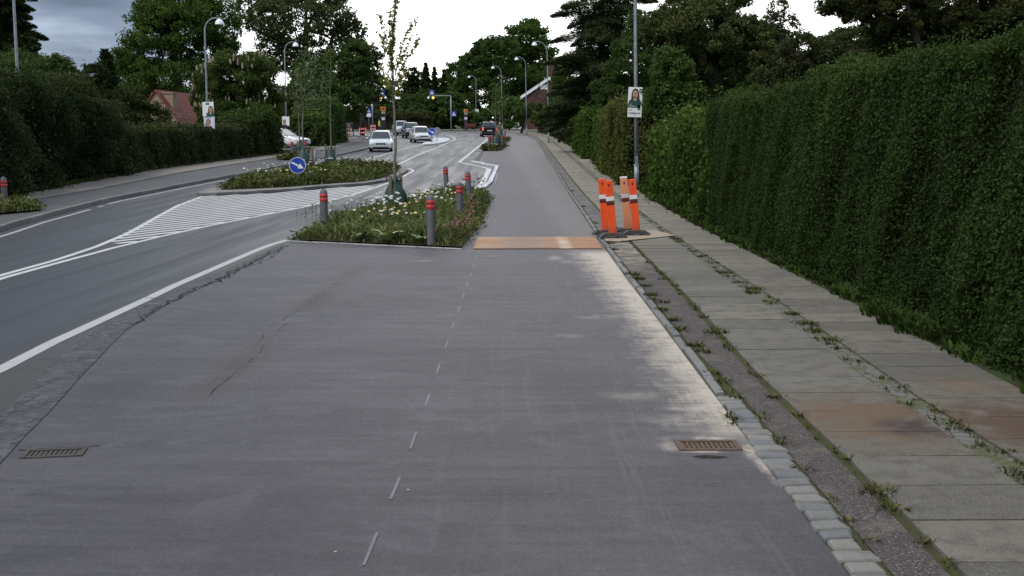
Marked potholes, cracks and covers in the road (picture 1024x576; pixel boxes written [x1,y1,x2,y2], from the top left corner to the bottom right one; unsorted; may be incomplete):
crack [132,246,288,324]
